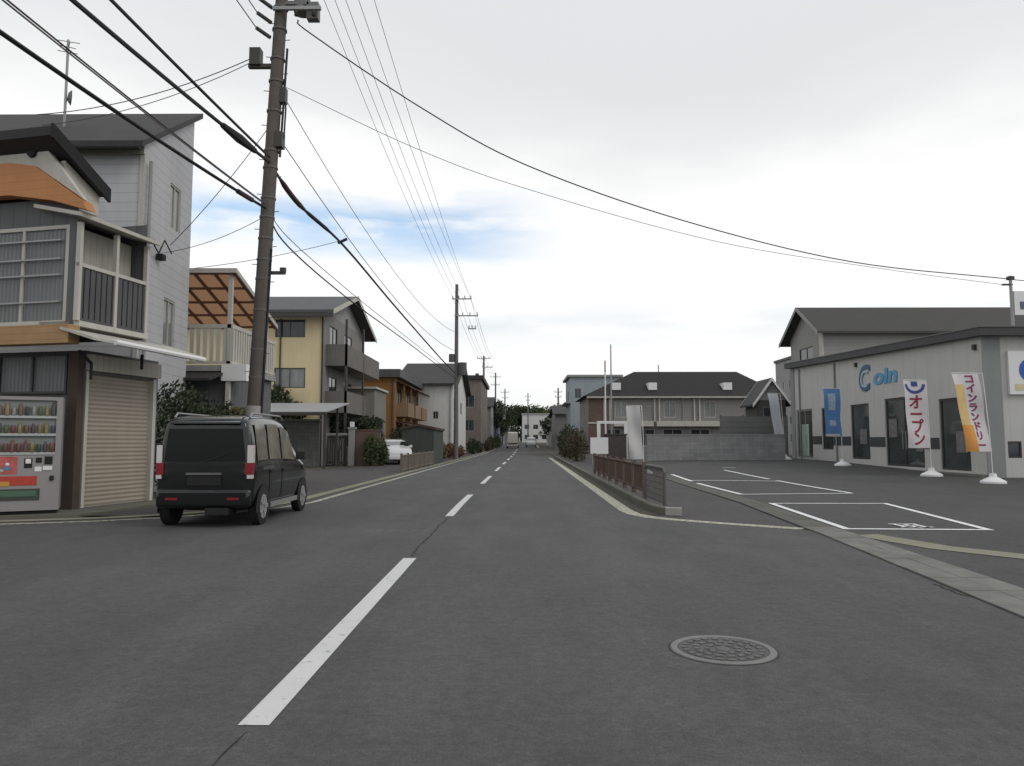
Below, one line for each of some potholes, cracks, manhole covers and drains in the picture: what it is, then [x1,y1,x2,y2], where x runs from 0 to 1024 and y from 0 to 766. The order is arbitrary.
manhole cover [668,635,780,666]
crack [212,731,247,766]
